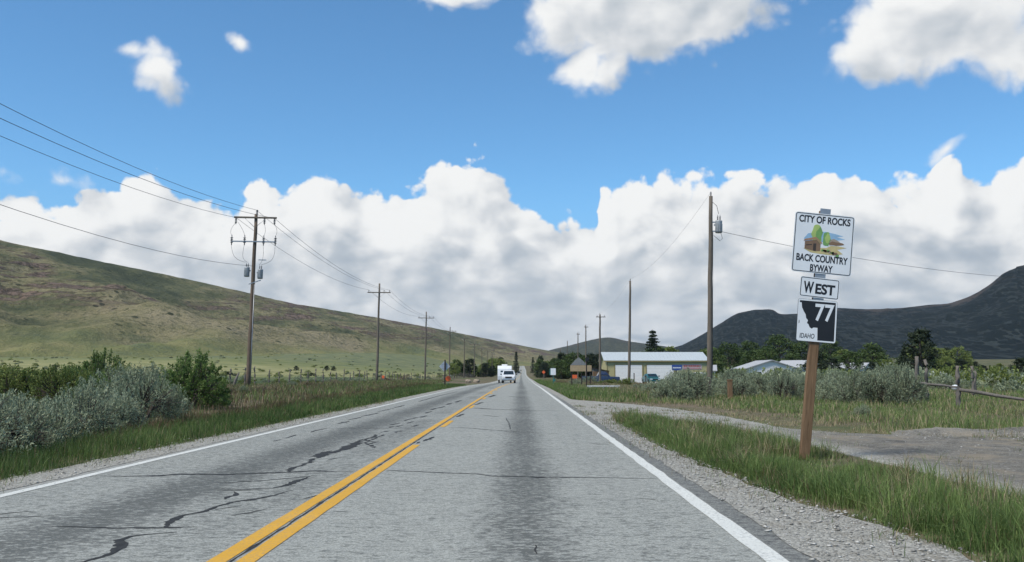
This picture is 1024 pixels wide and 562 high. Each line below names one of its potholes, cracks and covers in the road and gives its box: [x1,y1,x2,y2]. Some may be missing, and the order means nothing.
crack [473,396,558,434]
crack [222,476,307,491]
crack [0,511,181,529]
